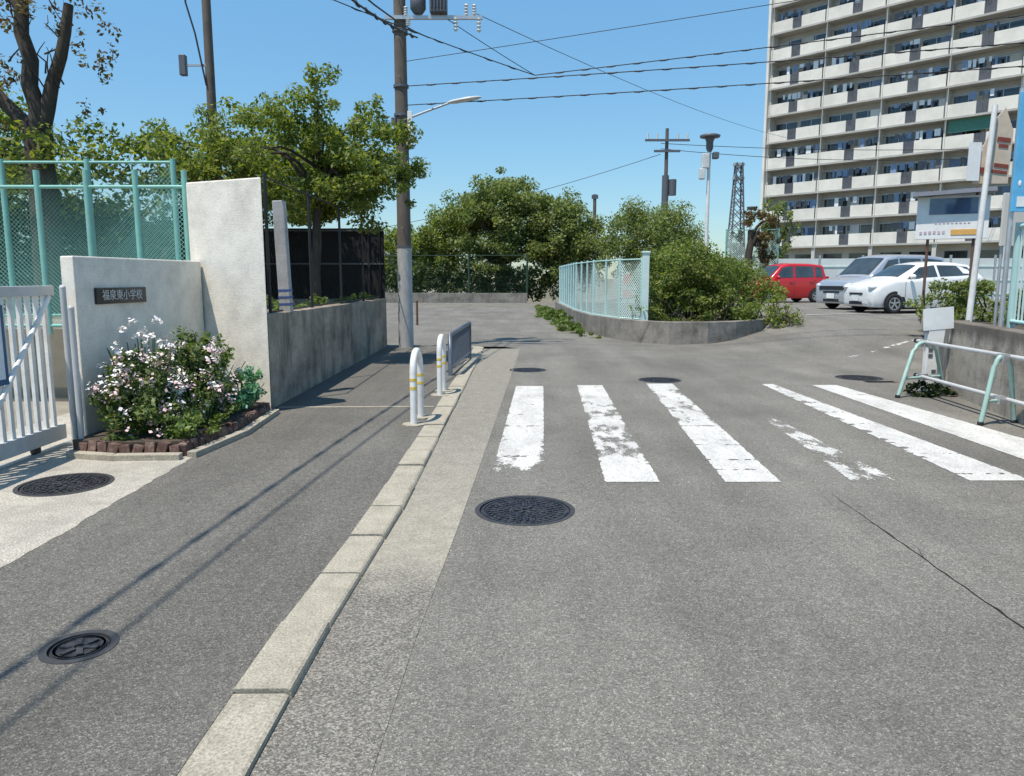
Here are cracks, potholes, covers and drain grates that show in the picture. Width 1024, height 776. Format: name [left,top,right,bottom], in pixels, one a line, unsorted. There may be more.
manhole cover [475,495,575,526]
crack [832,494,1024,629]
manhole cover [37,629,120,665]
manhole cover [12,473,115,497]
